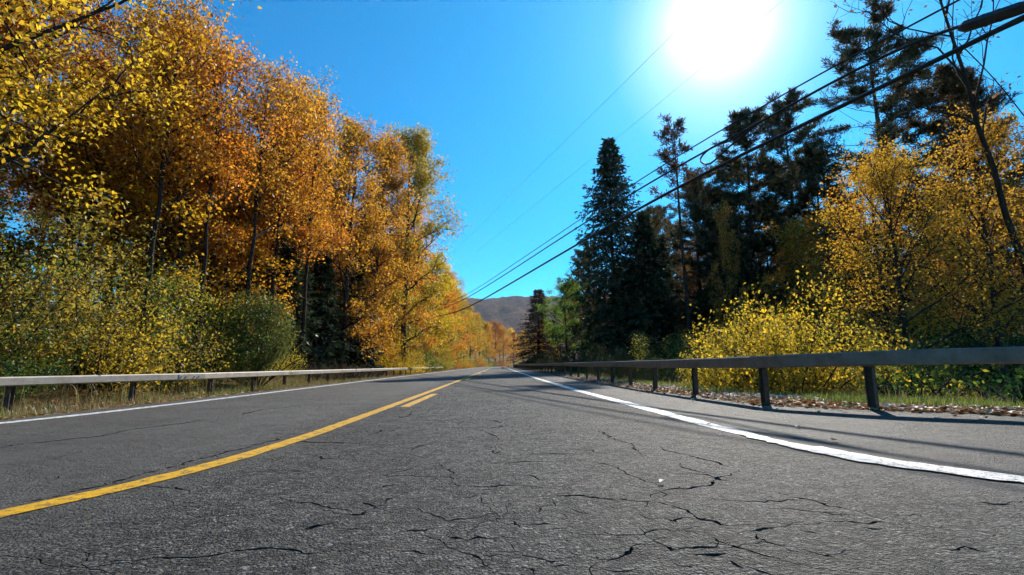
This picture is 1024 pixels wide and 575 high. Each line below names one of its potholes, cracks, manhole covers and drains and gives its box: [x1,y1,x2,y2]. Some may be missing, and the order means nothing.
crack [4,421,940,575]
